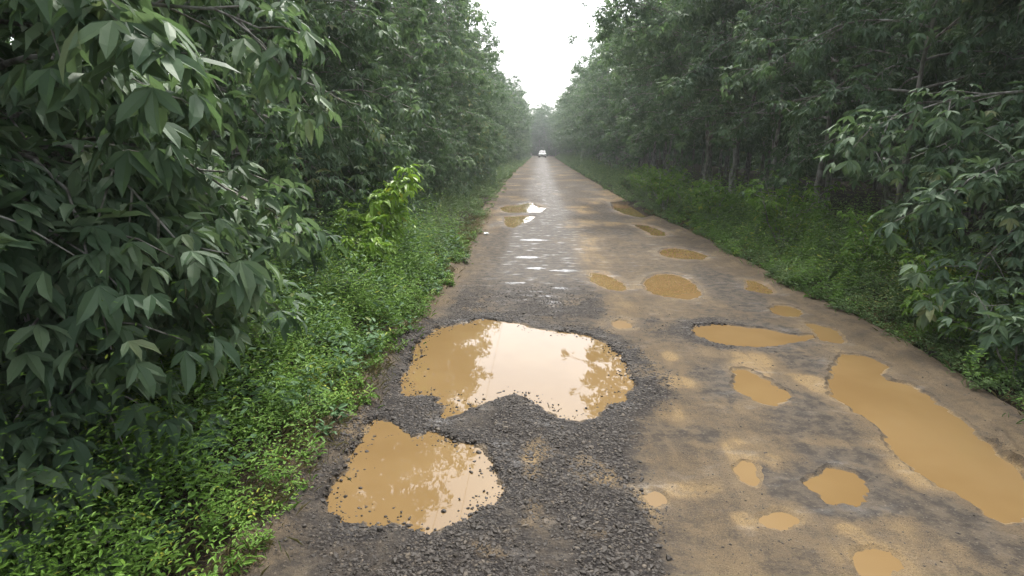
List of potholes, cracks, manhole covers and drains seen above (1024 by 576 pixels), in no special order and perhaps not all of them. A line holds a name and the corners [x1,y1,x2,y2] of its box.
pothole [800,463,876,508]
pothole [743,279,777,294]
pothole [585,272,631,291]
pothole [632,224,669,236]
pothole [731,459,764,488]
pothole [823,352,1024,526]
pothole [498,202,547,213]
pothole [803,322,848,344]
pothole [767,303,806,317]
pothole [502,215,537,228]
pothole [688,322,816,347]
pothole [319,415,510,535]
